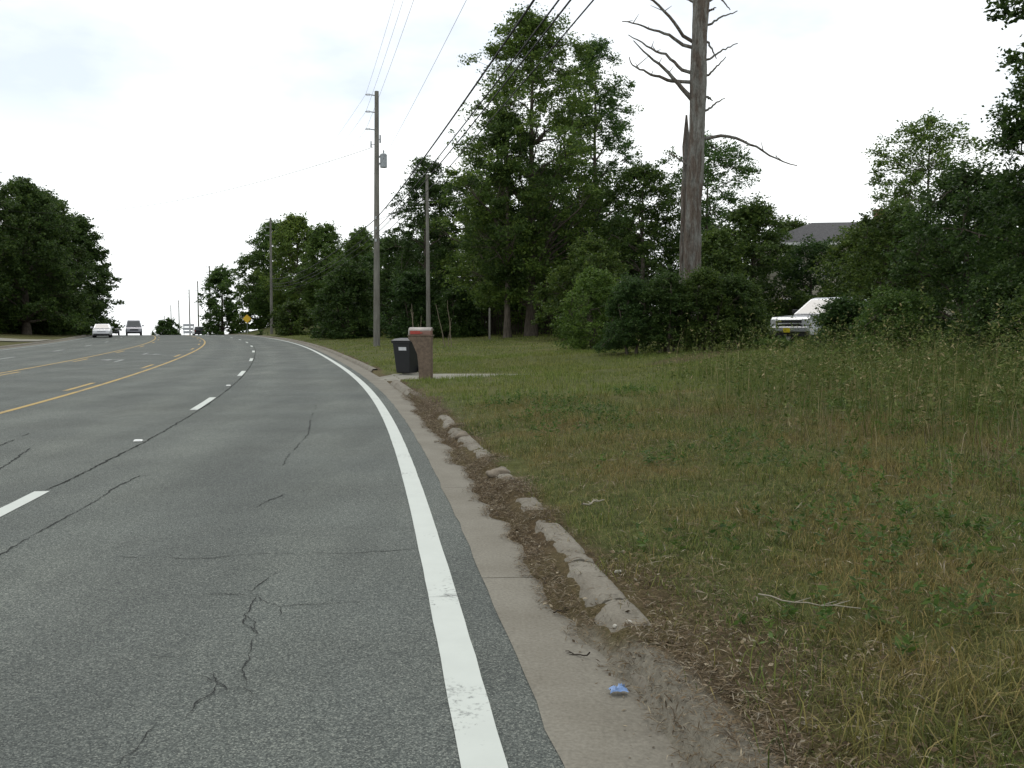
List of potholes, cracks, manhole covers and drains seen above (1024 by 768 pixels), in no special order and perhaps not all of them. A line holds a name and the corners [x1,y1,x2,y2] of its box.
crack [186,572,362,717]
crack [0,475,140,554]
